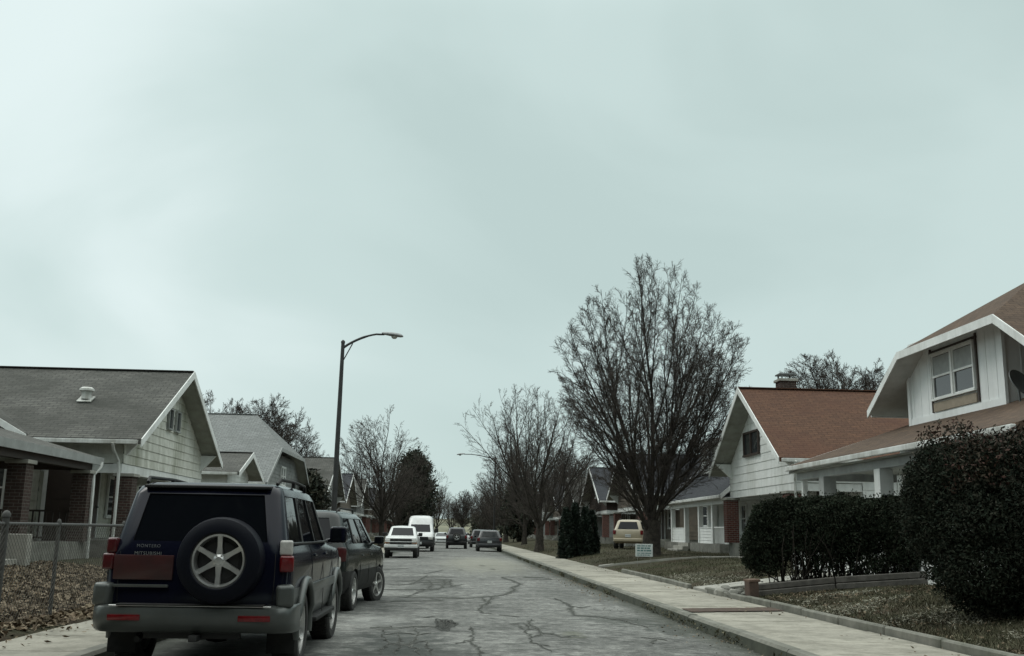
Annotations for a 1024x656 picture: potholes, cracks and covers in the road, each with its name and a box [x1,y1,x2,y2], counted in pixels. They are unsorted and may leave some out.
pothole [434,618,458,631]
crack [370,568,667,656]
